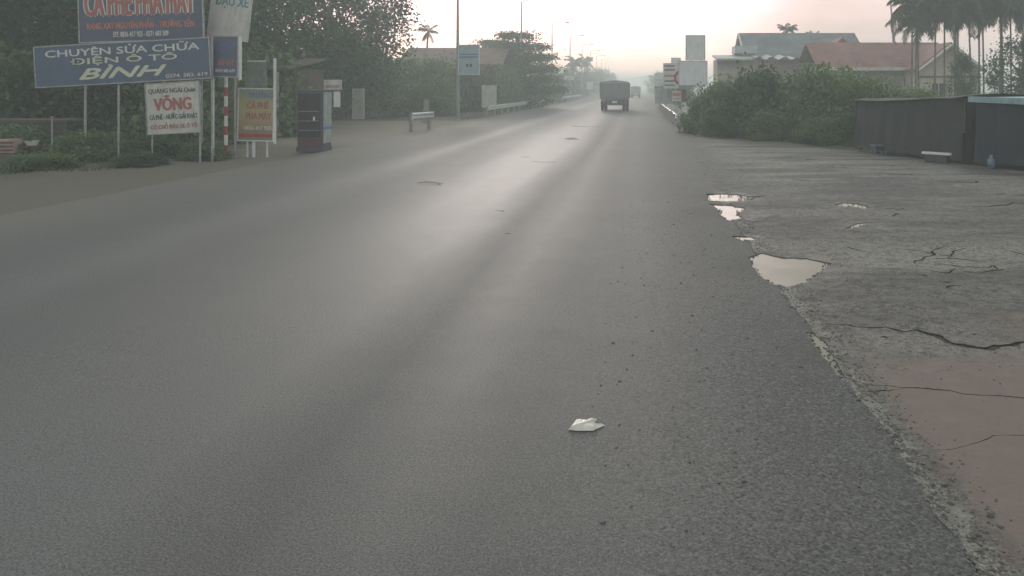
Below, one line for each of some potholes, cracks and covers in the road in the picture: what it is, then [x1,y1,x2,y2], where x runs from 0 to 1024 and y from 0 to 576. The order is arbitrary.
crack [948,193,1024,207]
pothole [710,204,746,221]
pothole [706,193,765,202]
crack [834,324,1024,350]
crack [896,241,1024,291]
crack [856,381,1024,399]
pothole [749,253,832,288]
